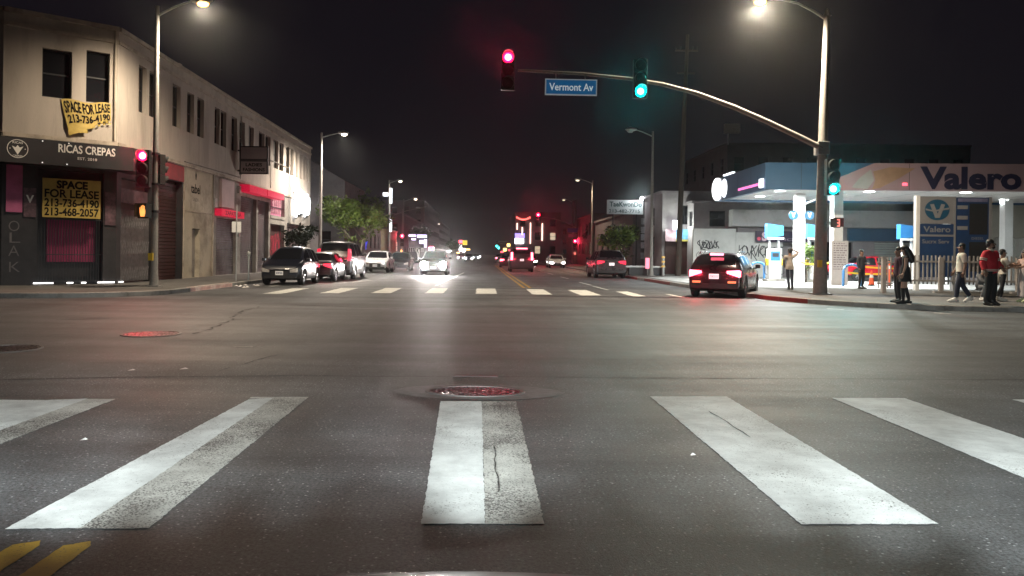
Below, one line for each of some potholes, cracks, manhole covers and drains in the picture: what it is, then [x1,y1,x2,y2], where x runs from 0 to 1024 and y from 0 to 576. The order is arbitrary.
crack [192,306,260,334]
manhole cover [0,344,44,353]
manhole cover [393,384,564,400]
